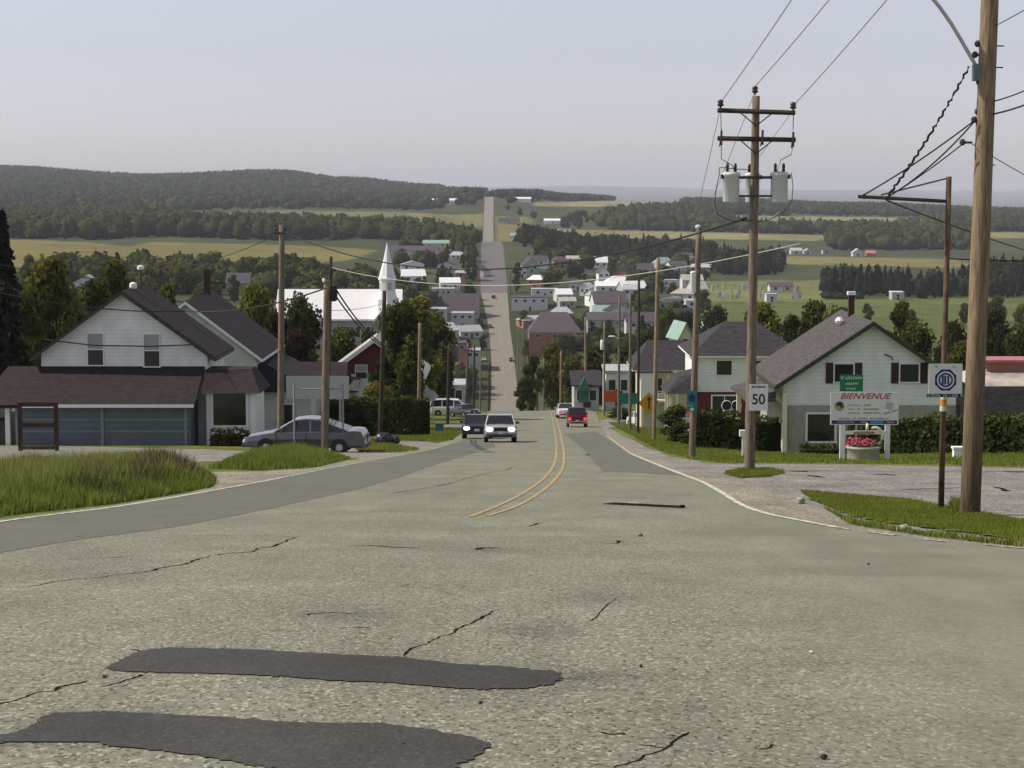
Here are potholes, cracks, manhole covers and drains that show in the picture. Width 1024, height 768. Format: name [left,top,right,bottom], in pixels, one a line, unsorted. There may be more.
crack [0,674,143,704]
crack [26,535,294,587]
crack [599,731,690,767]
crack [403,609,500,657]
